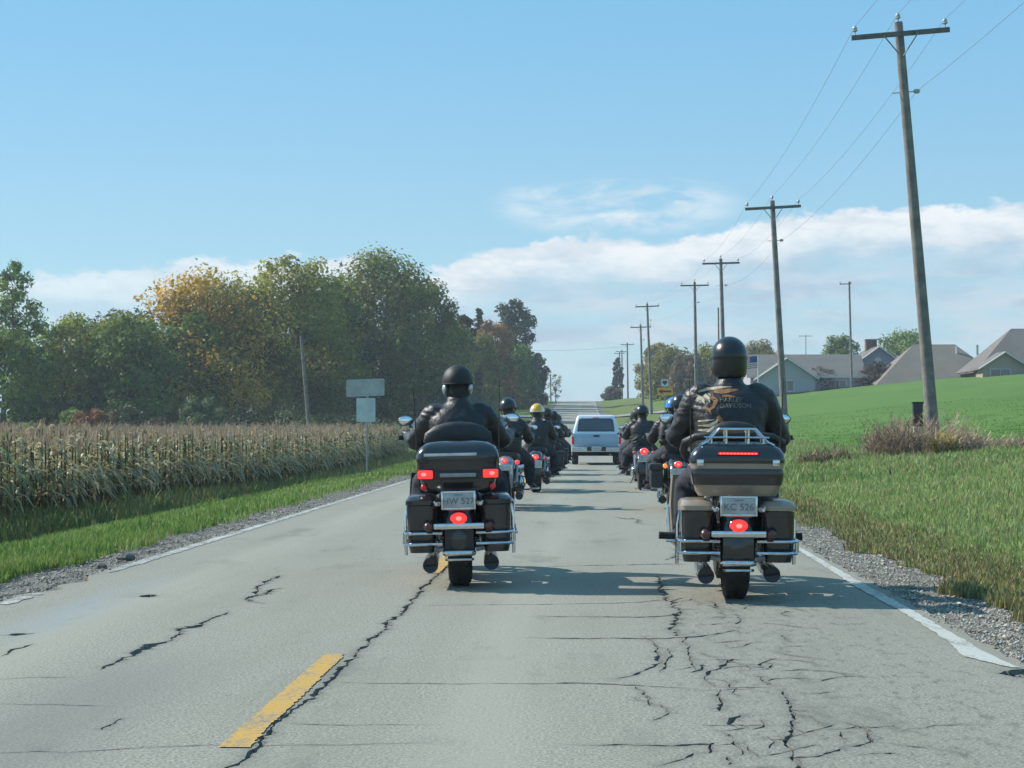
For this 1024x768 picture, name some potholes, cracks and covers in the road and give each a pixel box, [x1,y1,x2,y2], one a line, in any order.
crack [100,565,952,768]
